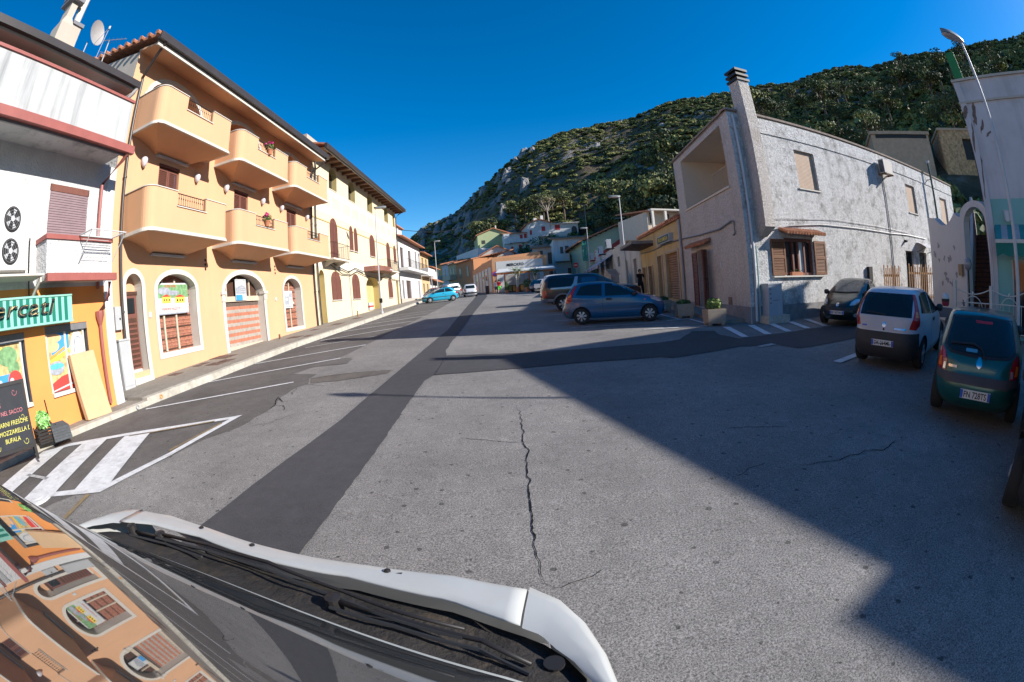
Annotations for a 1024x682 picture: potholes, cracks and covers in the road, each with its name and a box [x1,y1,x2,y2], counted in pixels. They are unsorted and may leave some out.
crack [468,405,601,588]
crack [737,442,893,476]
